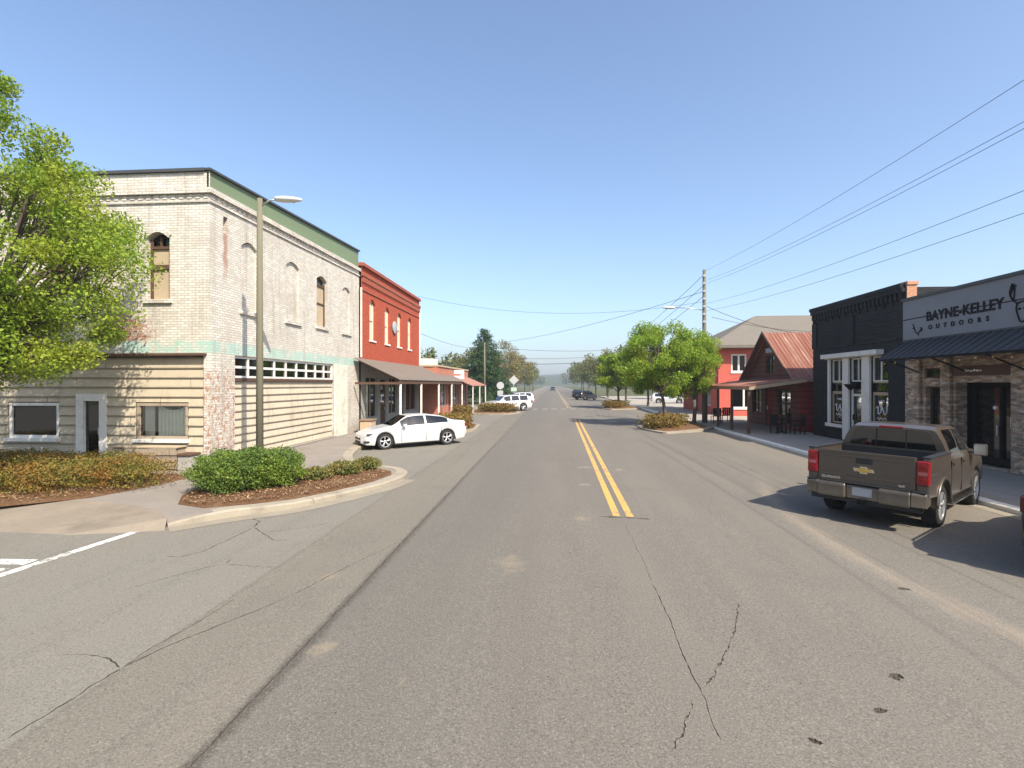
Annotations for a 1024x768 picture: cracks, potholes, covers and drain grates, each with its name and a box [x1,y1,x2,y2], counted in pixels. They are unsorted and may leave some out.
crack [1,546,390,742]
crack [601,516,739,750]
crack [129,519,322,589]
